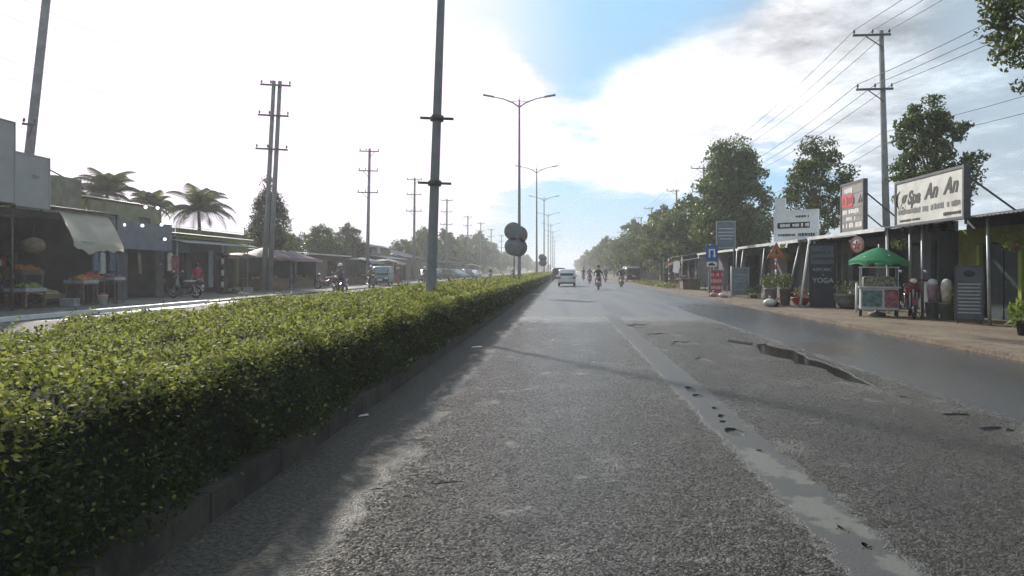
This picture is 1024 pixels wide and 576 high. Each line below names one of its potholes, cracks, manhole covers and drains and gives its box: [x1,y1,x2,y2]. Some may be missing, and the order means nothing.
pothole [754,343,882,388]
pothole [725,427,744,436]
